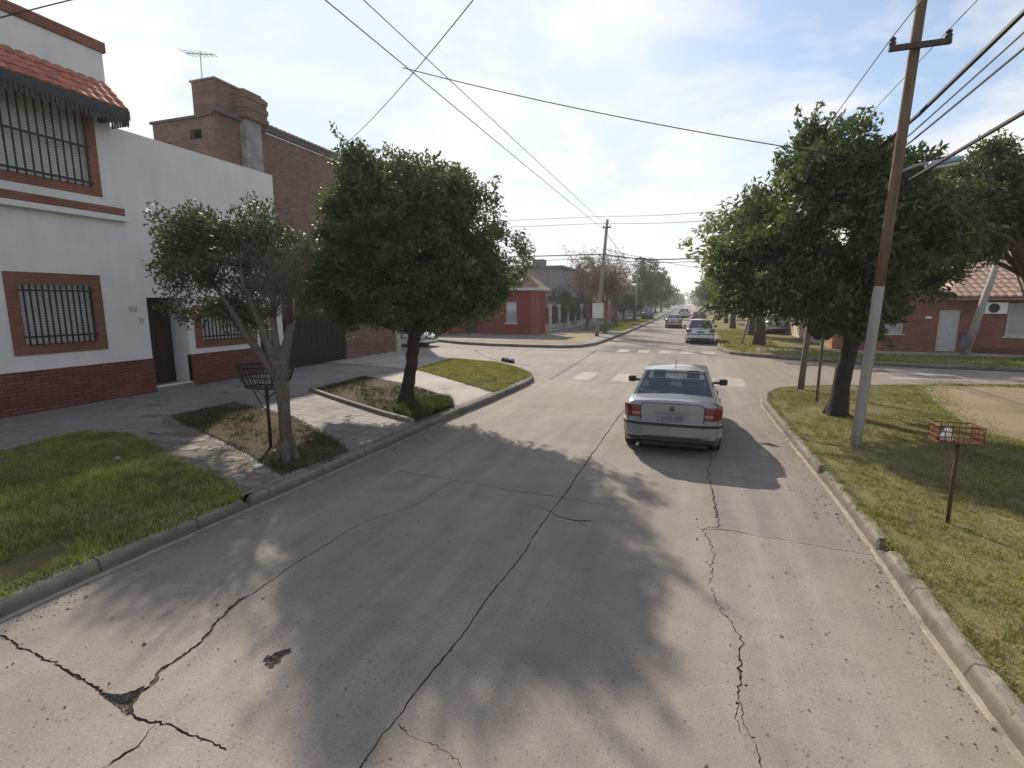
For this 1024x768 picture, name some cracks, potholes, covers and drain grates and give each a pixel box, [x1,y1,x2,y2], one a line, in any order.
crack [693,450,874,768]
pothole [99,685,145,716]
pothole [263,648,292,669]
crack [0,410,625,768]
